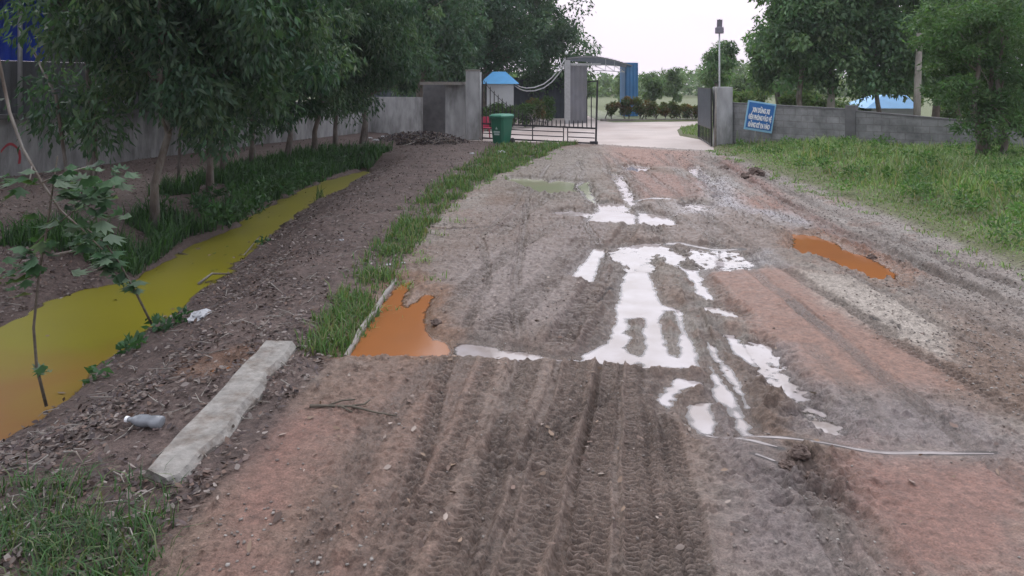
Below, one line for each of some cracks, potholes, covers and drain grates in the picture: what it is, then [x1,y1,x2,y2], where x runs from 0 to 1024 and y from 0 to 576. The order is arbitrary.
pothole [784,229,909,281]
pothole [336,275,456,357]
